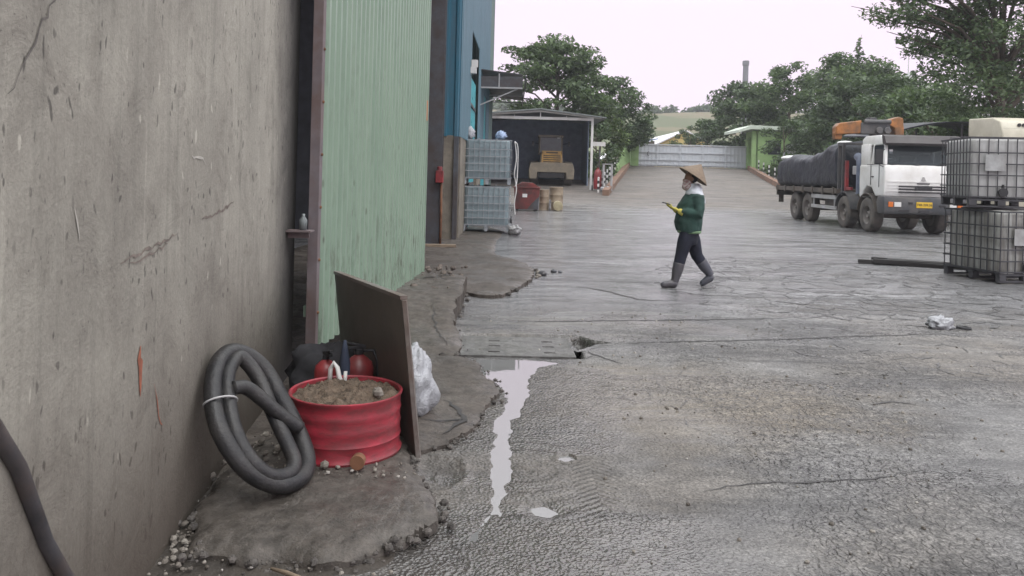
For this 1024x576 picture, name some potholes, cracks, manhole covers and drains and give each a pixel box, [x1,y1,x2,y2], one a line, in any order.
crack [533,256,1024,382]
crack [704,472,908,491]
pothole [567,336,617,359]
